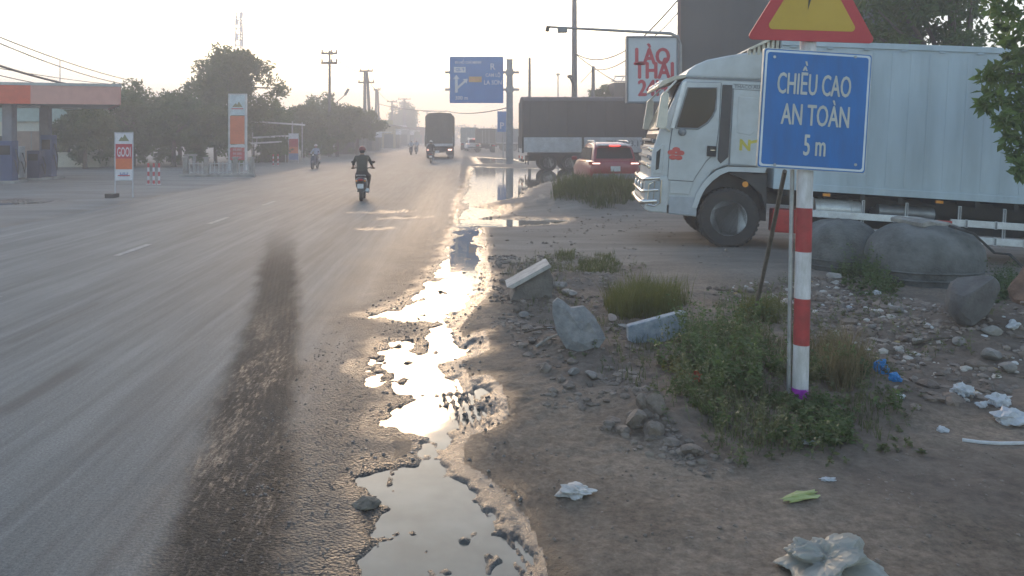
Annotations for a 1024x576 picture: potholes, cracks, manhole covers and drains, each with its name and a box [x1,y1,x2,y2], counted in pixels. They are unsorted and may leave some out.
pothole [363,375,509,448]
pothole [359,325,490,398]
pothole [360,208,493,329]
pothole [342,435,548,576]
